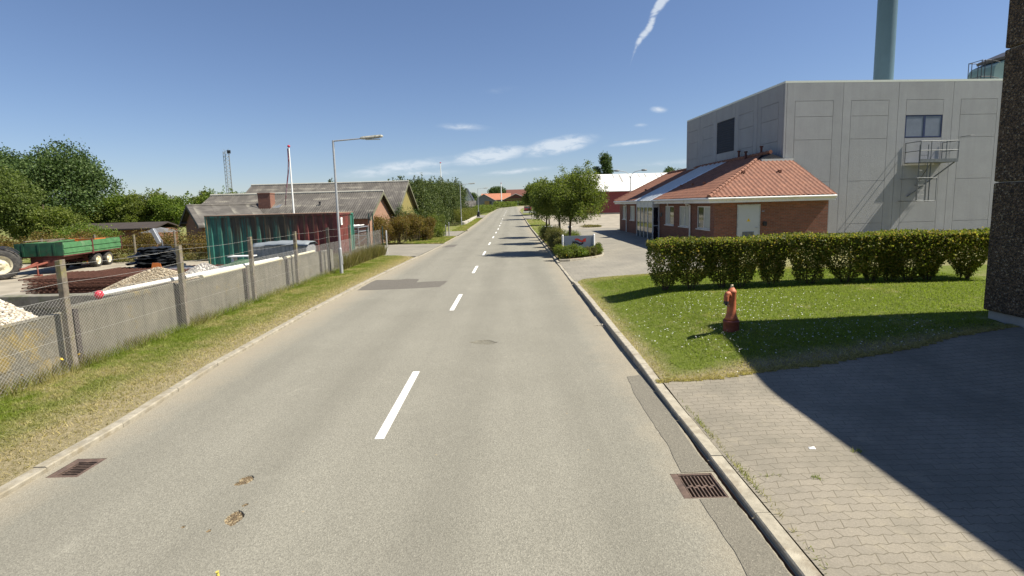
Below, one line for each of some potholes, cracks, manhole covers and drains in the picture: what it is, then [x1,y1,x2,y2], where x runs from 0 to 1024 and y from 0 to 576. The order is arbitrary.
pothole [233,475,254,486]
drain grate [670,473,729,499]
drain grate [46,458,107,478]
pothole [224,510,245,526]
